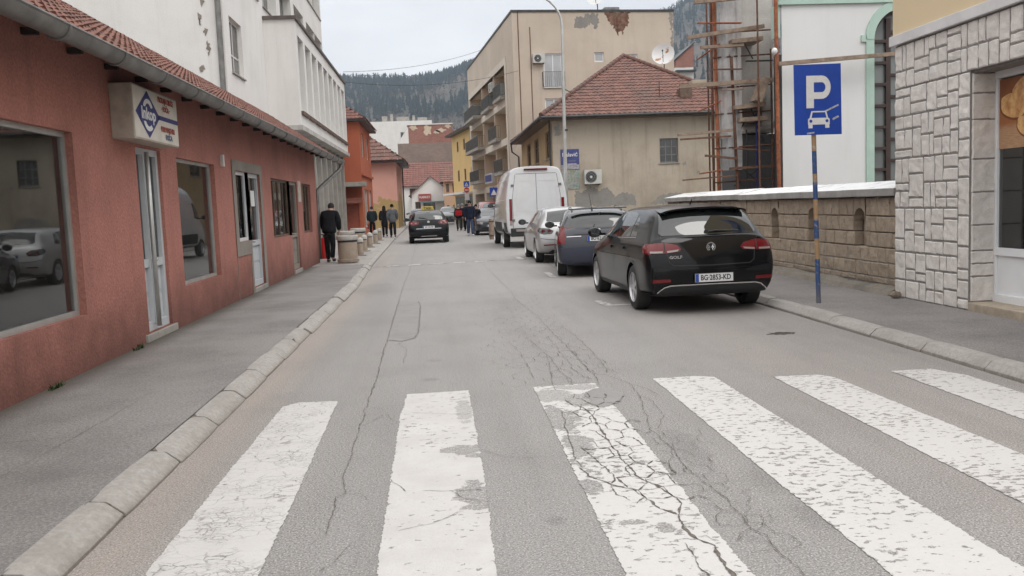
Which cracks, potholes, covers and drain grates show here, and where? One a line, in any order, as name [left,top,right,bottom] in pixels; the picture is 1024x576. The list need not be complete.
crack [320,250,452,571]
crack [562,383,806,576]
